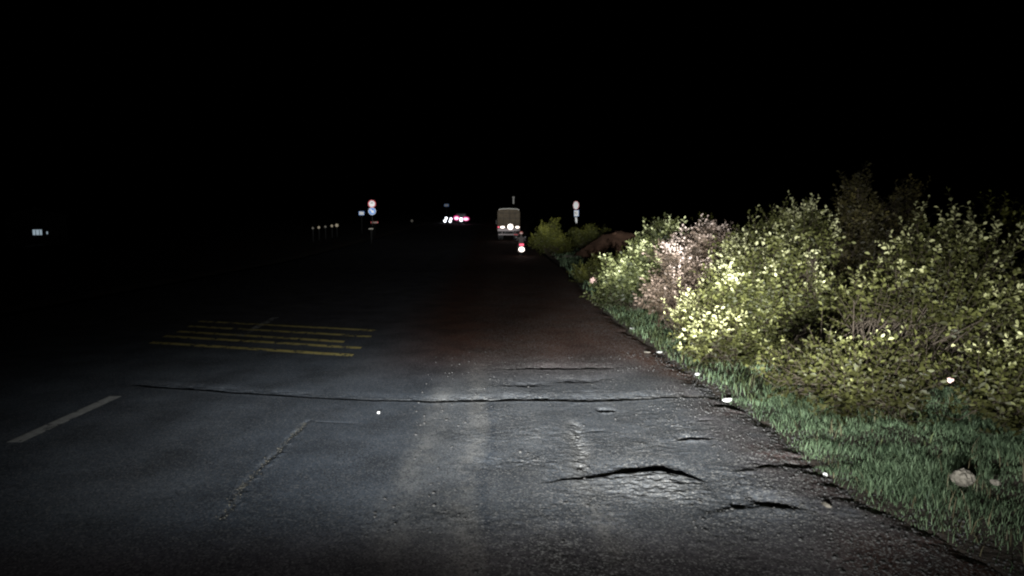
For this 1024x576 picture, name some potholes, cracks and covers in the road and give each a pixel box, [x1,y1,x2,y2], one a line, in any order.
crack [122,363,718,466]
pothole [592,406,620,415]
